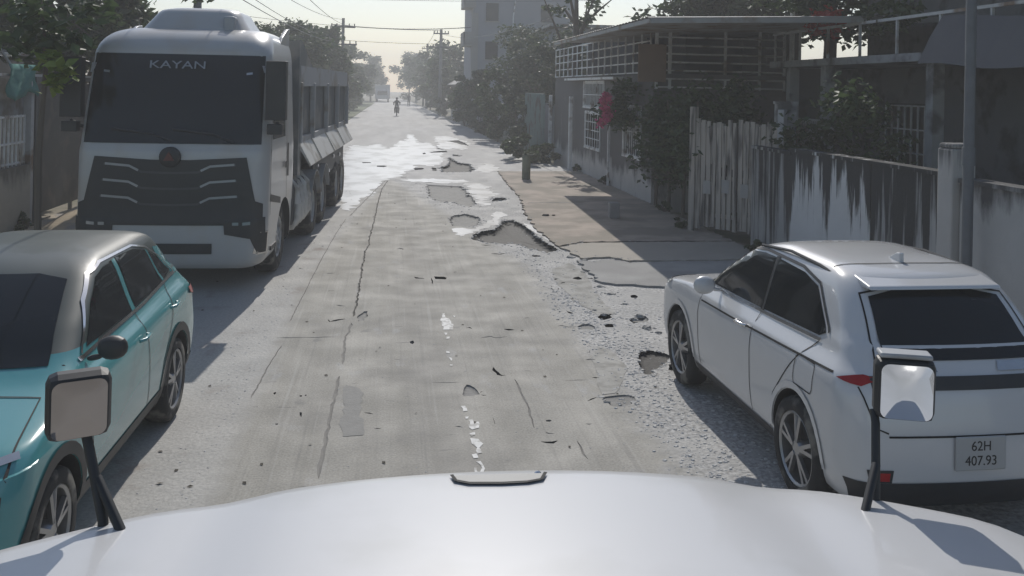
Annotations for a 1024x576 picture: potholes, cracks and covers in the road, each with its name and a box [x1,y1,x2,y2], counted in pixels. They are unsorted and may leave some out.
pothole [632,350,670,375]
pothole [439,157,475,172]
crack [251,347,281,397]
pothole [470,220,560,253]
pothole [448,213,481,226]
pothole [425,184,477,207]
crack [290,180,403,478]
pothole [599,395,636,407]
crack [492,367,557,444]
pothole [463,385,479,396]
